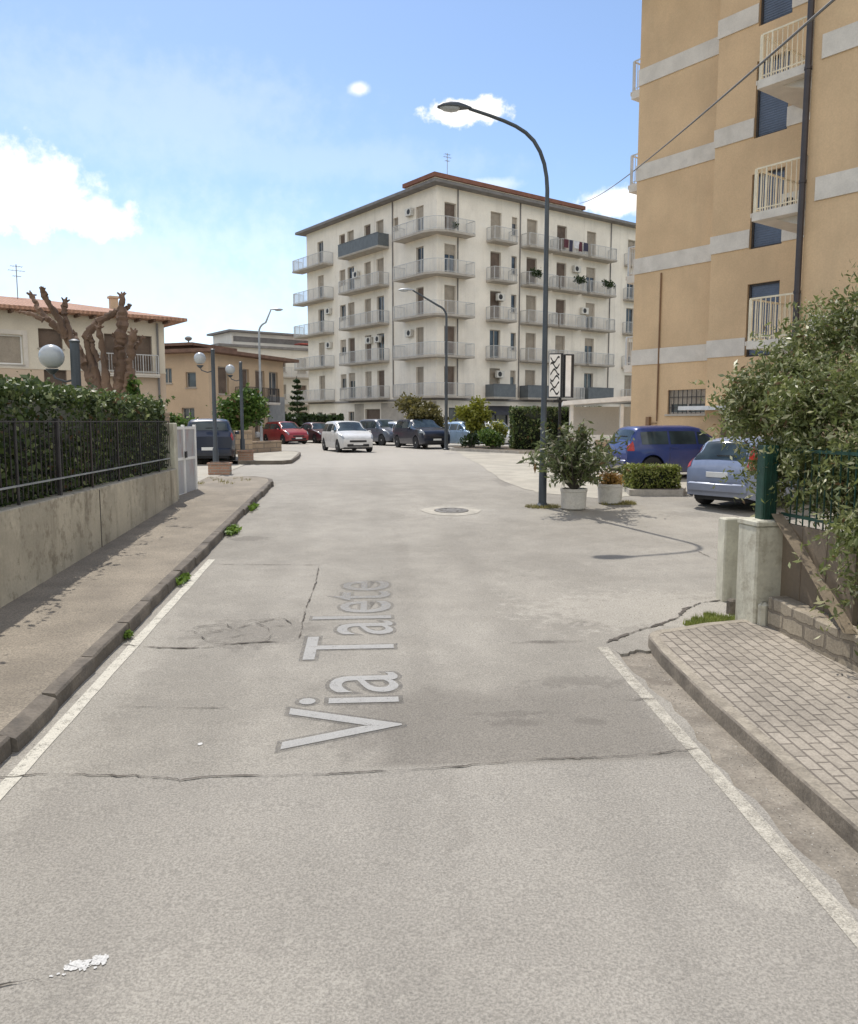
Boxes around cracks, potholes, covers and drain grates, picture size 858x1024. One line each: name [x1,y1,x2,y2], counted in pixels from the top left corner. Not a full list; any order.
crack [3,748,702,780]
manhole cover [421,507,481,516]
crack [607,600,718,642]
